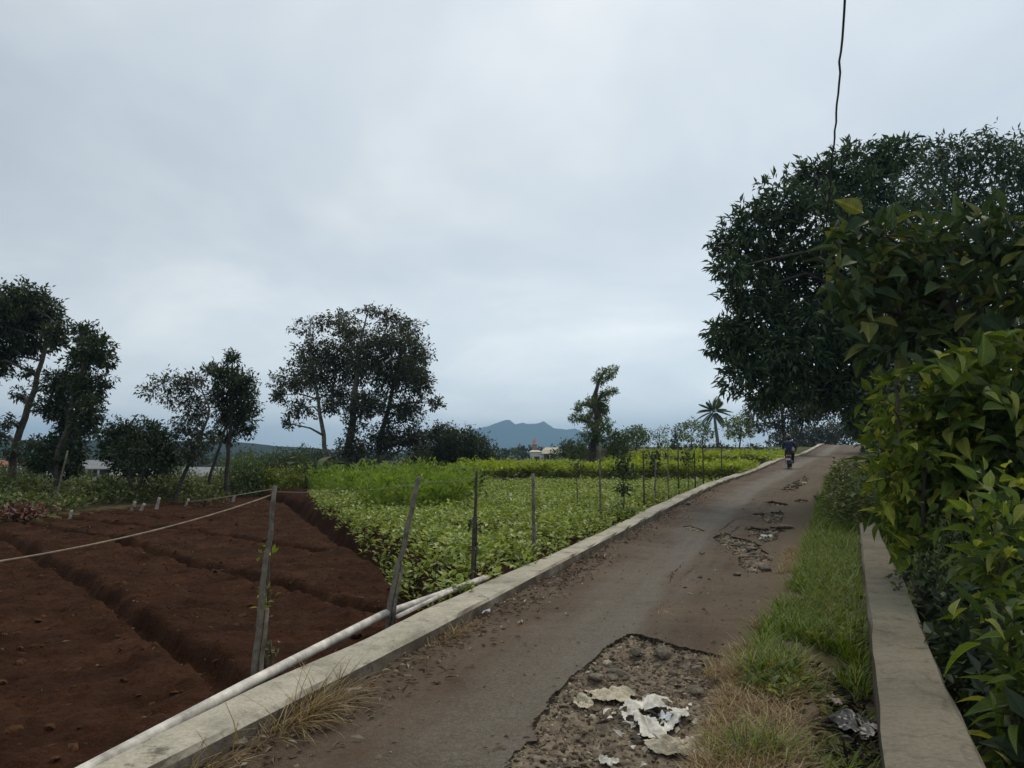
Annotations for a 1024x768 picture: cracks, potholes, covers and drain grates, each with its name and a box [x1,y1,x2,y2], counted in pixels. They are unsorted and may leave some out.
pothole [745,526,786,543]
pothole [713,533,773,572]
pothole [505,634,730,768]
